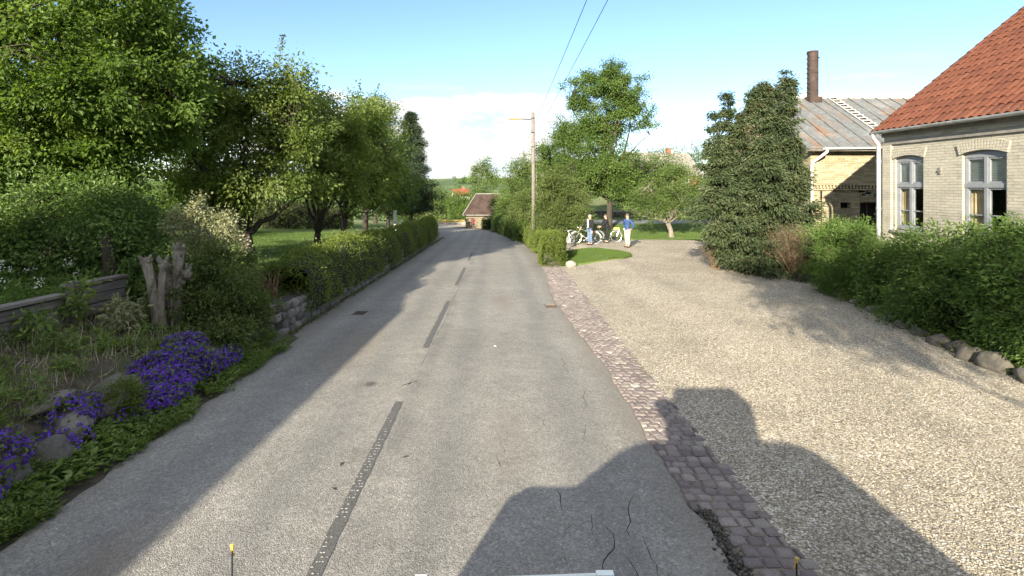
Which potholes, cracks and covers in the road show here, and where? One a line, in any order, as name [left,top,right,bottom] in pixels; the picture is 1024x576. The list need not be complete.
crack [564,485,658,575]
